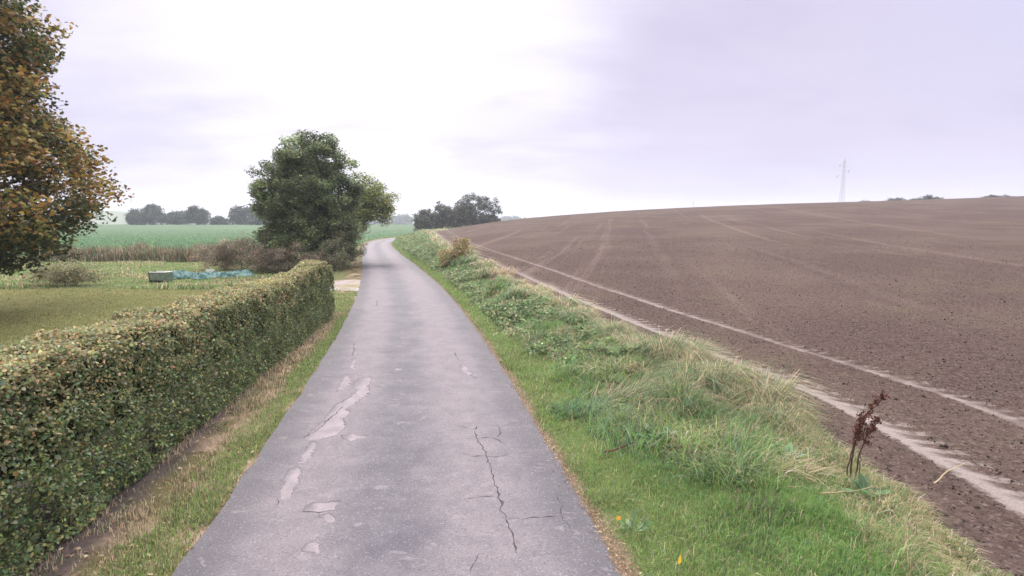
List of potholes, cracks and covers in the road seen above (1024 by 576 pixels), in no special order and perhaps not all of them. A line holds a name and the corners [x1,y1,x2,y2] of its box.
pothole [278,466,302,499]
pothole [296,441,317,463]
pothole [300,541,323,554]
pothole [318,513,336,523]
pothole [302,500,342,512]
pothole [304,376,372,441]
crack [456,425,572,553]
